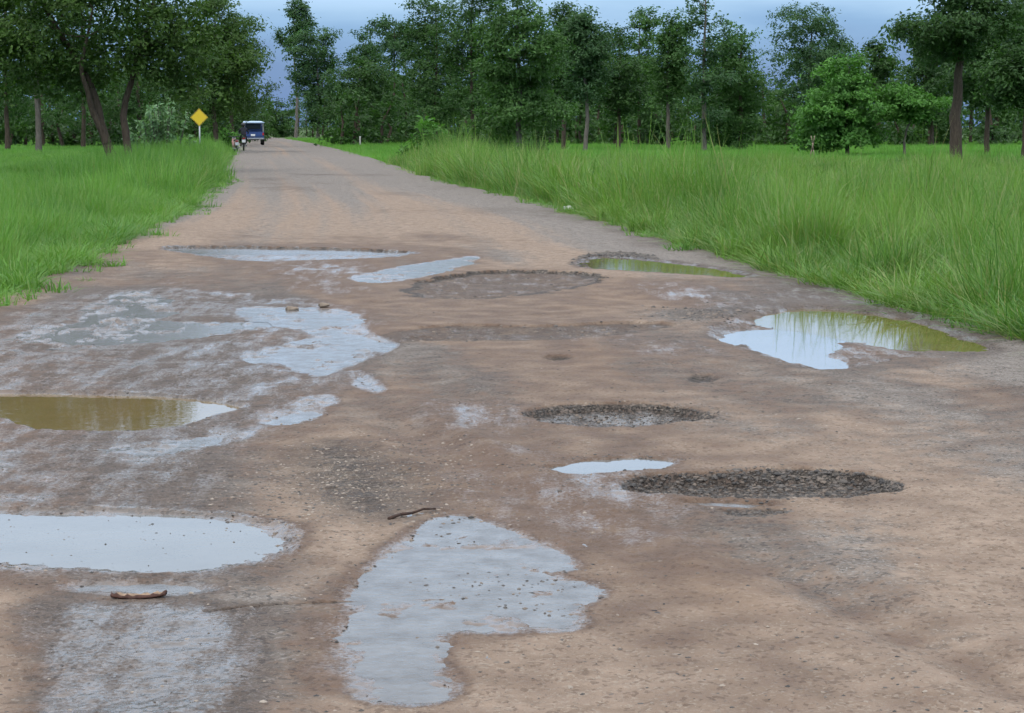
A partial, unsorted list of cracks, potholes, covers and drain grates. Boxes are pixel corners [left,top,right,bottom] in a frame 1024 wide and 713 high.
pothole [619,467,906,499]
pothole [399,269,610,299]
pothole [684,373,722,383]
pothole [164,245,417,261]
pothole [574,255,759,277]
pothole [521,401,717,427]
pothole [709,306,999,369]
pothole [545,455,678,474]
pothole [0,389,248,431]
pothole [0,505,293,573]
